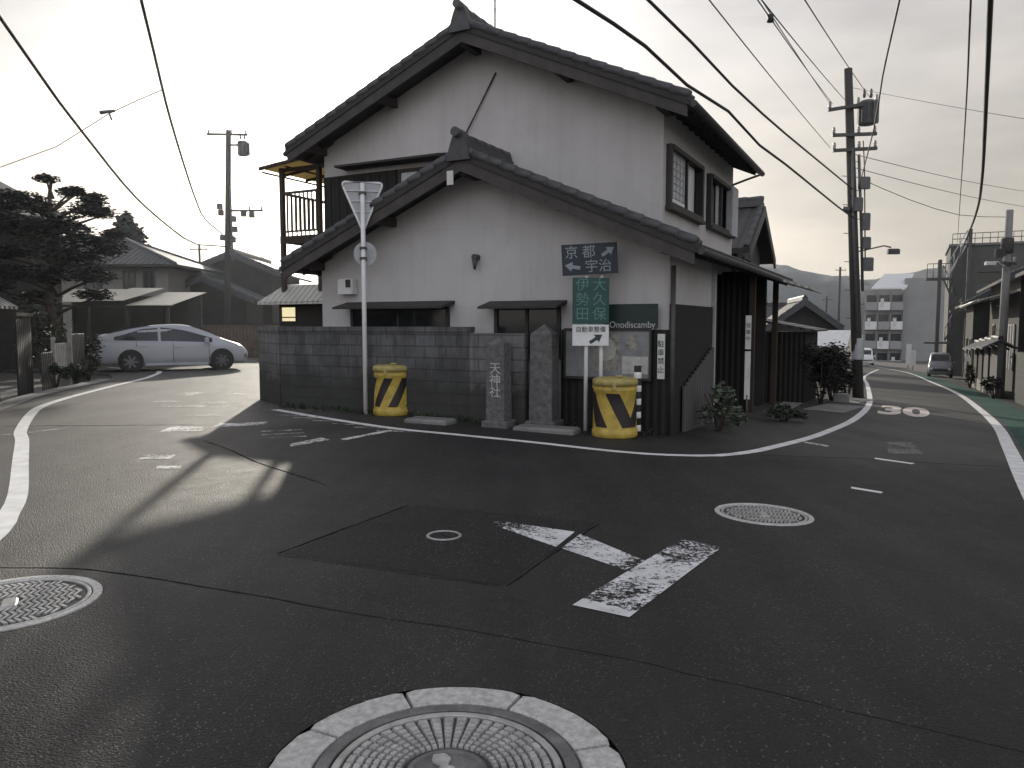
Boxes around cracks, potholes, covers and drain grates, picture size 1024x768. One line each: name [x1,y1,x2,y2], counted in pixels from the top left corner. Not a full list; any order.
manhole cover [269,687,626,768]
manhole cover [714,503,814,526]
utility cover [426,530,462,541]
manhole cover [0,575,103,632]
